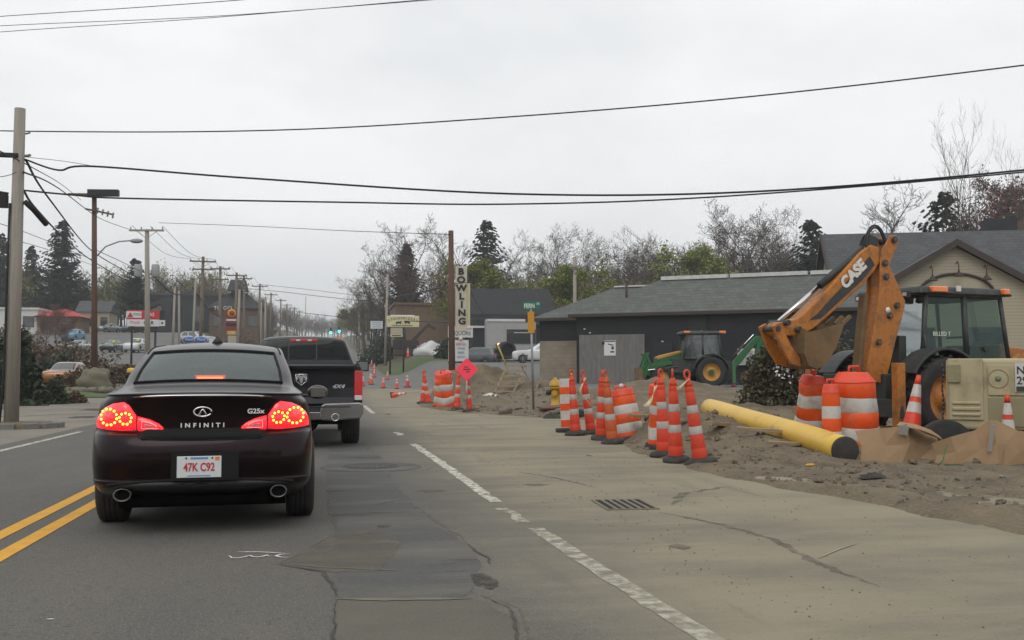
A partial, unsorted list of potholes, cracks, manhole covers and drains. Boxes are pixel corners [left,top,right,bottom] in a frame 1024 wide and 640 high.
crack [480,594,519,640]
manhole cover [320,462,421,472]
pothole [472,573,499,589]
drain grate [591,499,660,510]
